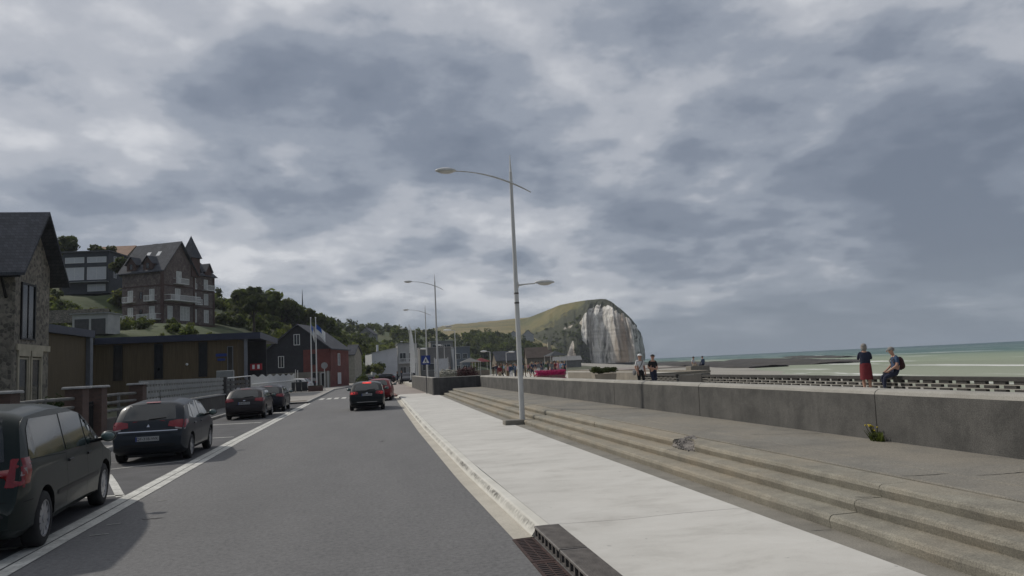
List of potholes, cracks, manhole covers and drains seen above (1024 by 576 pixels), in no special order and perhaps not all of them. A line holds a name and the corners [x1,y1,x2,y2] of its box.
drain grate [532,560,572,576]
drain grate [512,537,556,563]
drain grate [534,524,587,563]
